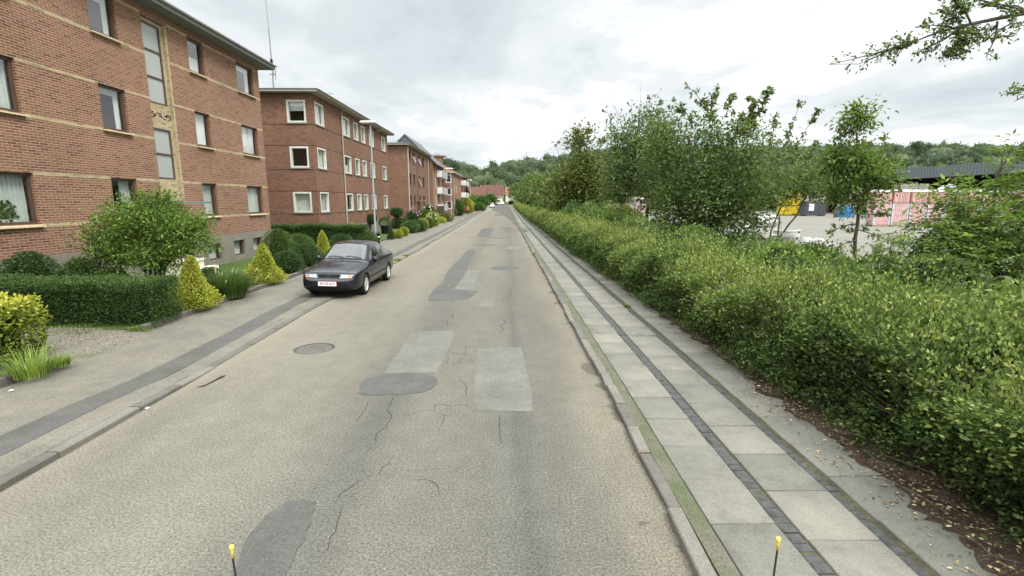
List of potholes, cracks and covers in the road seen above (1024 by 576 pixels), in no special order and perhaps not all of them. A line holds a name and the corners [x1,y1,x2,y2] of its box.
manhole cover [293,343,335,354]
crack [327,348,472,550]
